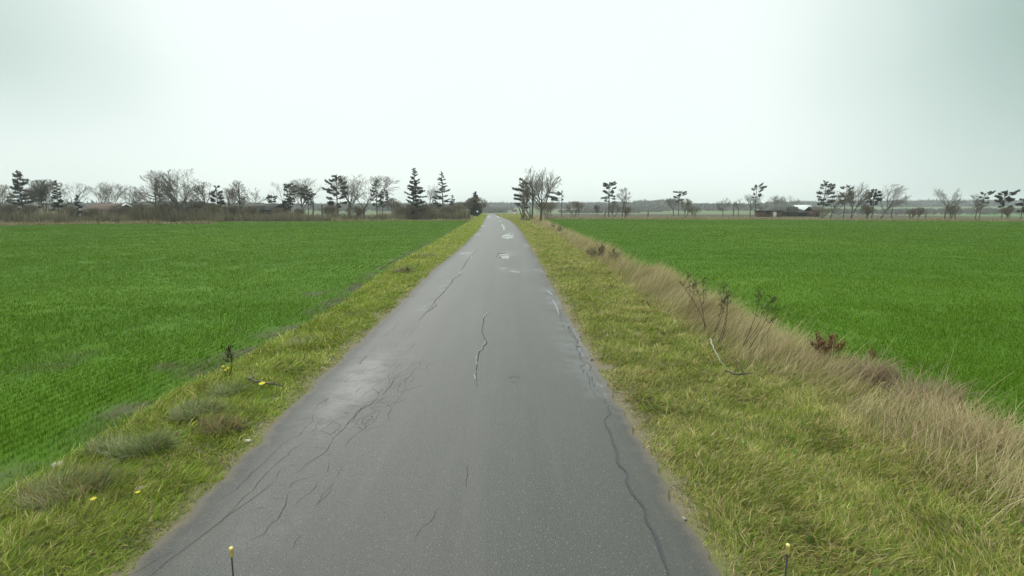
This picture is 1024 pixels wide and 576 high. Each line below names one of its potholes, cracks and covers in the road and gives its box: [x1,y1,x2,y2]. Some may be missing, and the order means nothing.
crack [474,313,488,383]
